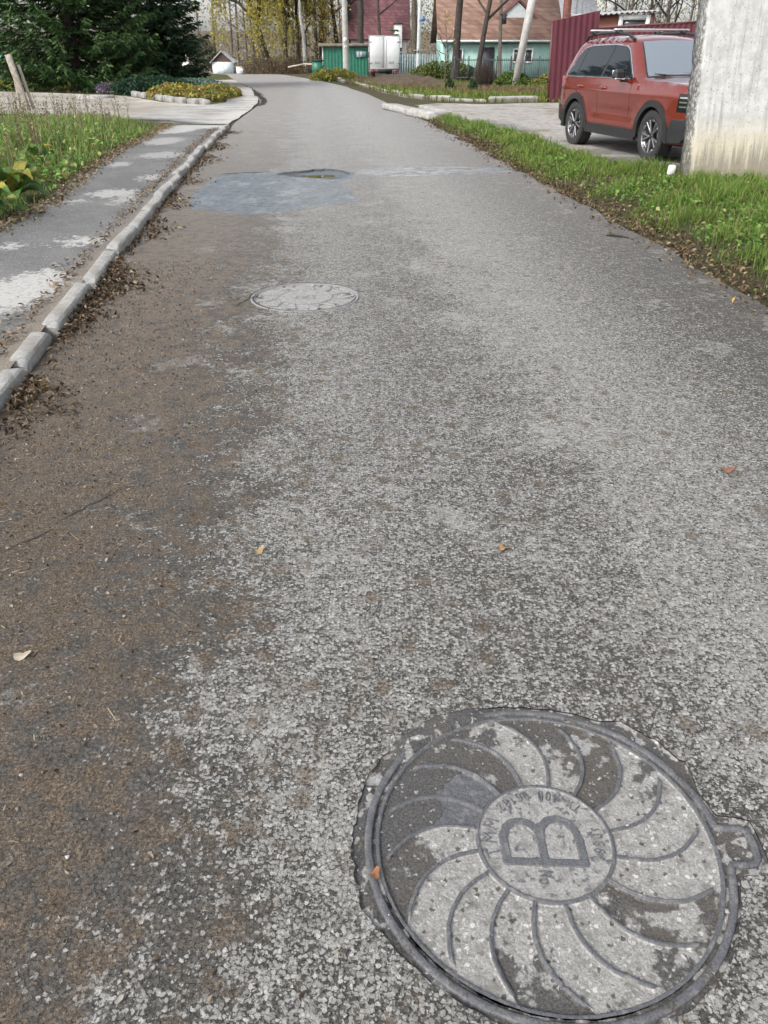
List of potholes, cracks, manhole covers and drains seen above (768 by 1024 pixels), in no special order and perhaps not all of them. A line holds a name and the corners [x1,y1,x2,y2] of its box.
pothole [277,168,351,179]
manhole cover [350,708,768,1024]
crack [3,486,134,551]
manhole cover [249,283,360,312]
